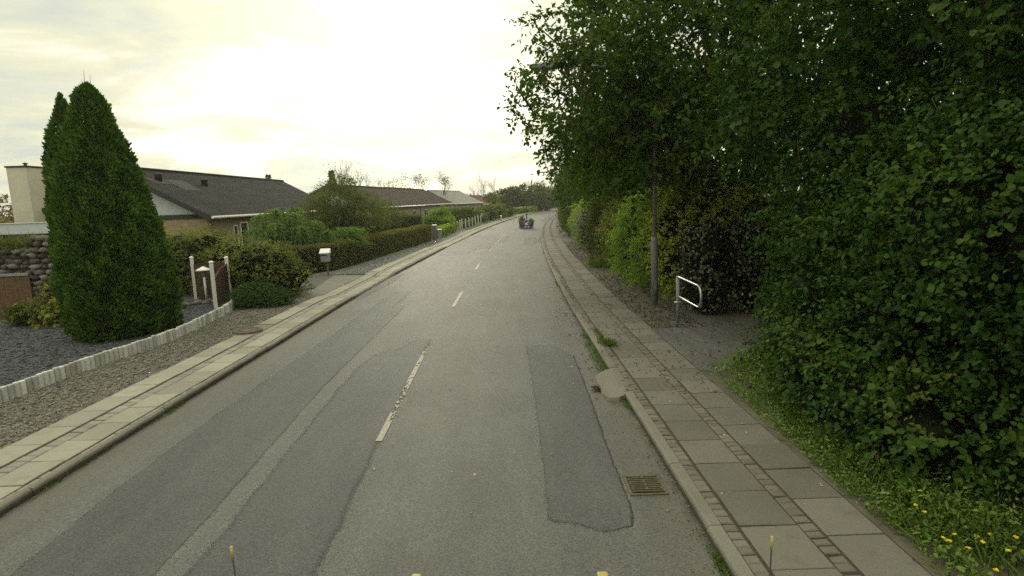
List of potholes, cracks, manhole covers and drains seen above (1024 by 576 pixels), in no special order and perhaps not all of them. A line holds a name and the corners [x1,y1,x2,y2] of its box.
drain grate [622,474,669,496]
manhole cover [226,325,273,337]
